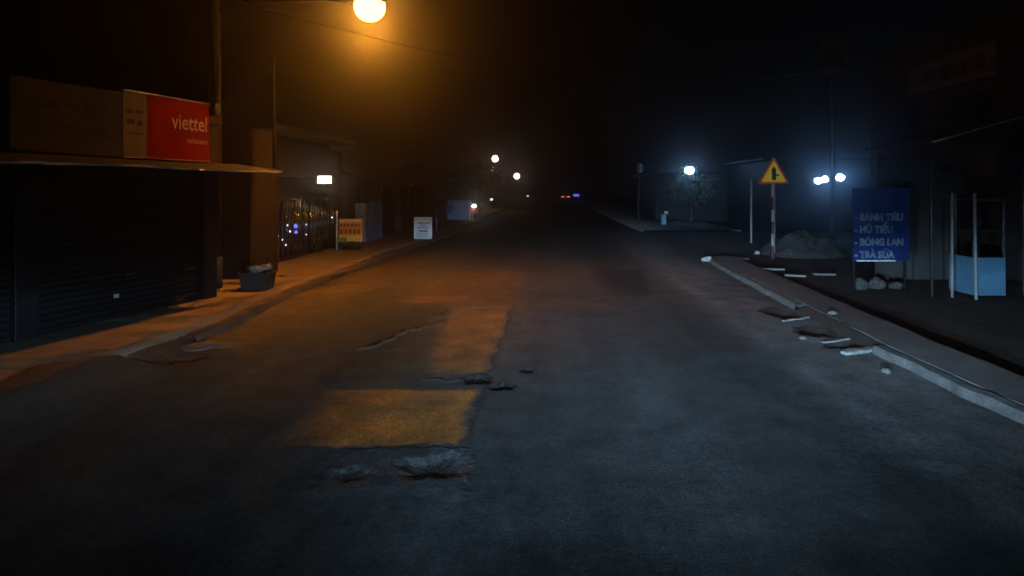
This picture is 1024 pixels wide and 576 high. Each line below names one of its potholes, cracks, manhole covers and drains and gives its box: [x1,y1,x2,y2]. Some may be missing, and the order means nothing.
pothole [462,373,494,385]
pothole [792,326,838,338]
pothole [385,448,480,483]
pothole [320,464,381,486]
pothole [485,381,520,391]
pothole [757,307,807,319]
crack [352,310,450,352]
